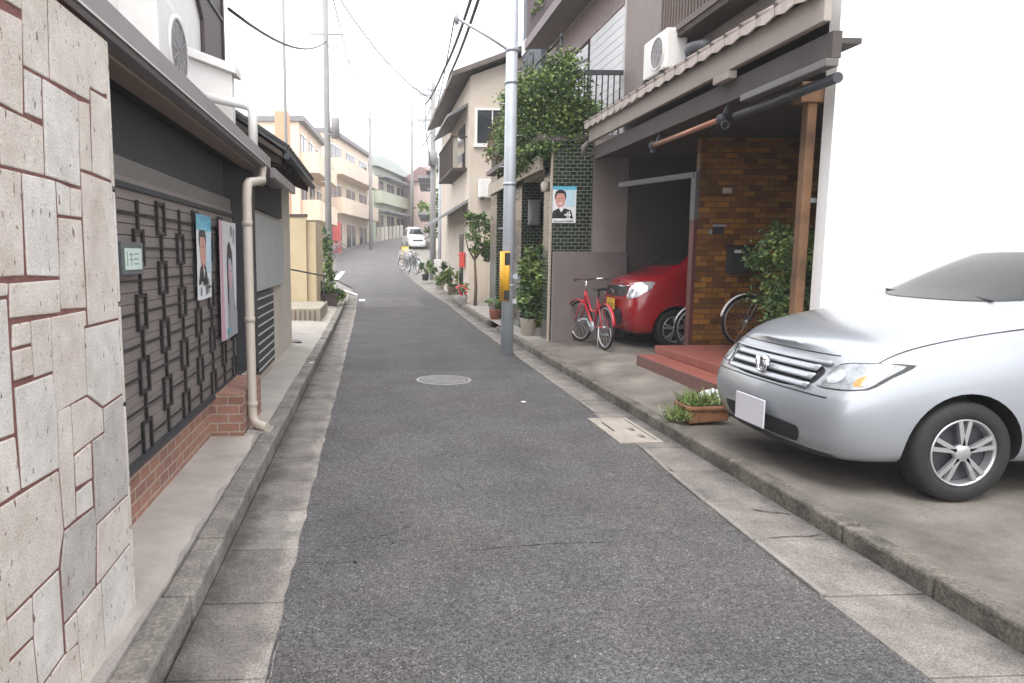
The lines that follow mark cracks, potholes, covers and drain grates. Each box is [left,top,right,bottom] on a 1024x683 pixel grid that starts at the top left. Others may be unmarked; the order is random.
crack [462,542,615,551]
manhole cover [416,375,471,385]
